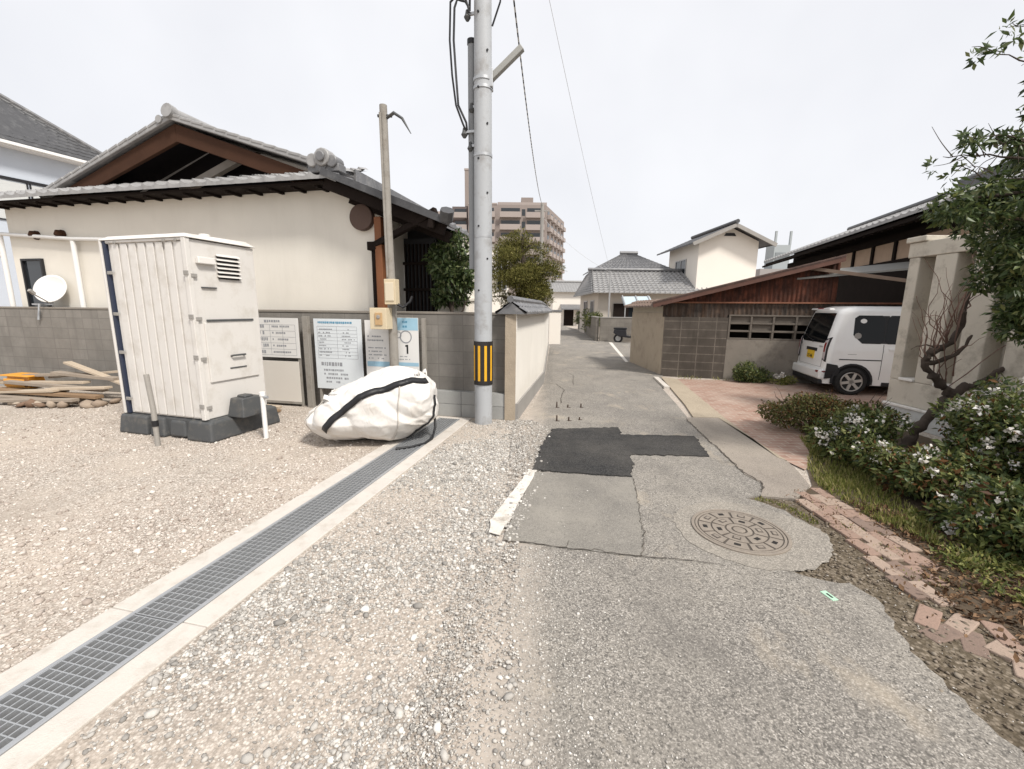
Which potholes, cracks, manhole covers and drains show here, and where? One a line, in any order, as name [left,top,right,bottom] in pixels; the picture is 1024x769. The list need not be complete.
manhole cover [691,509,792,556]
